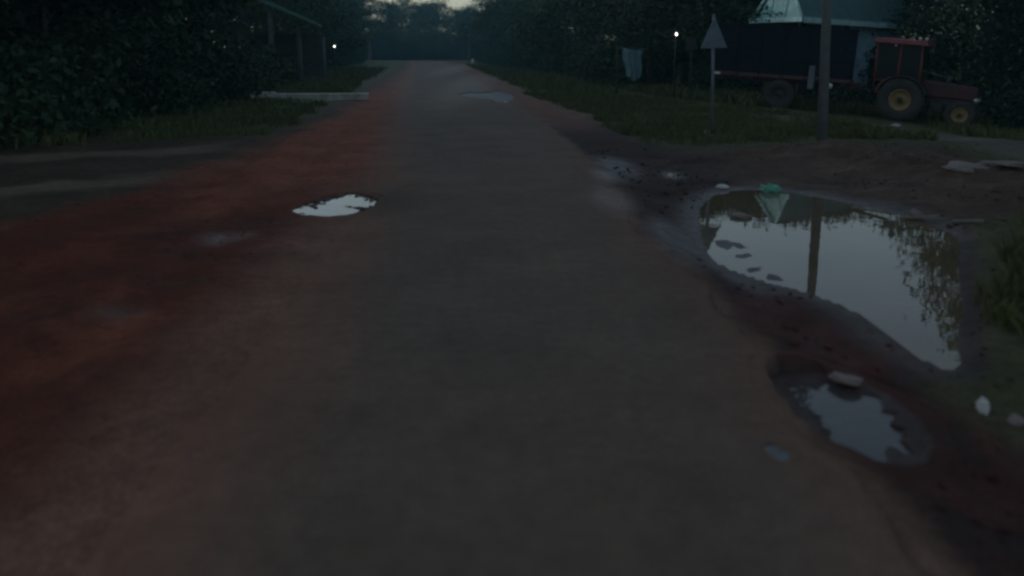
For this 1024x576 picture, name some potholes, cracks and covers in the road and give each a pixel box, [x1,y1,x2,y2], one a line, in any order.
pothole [456,91,518,103]
pothole [751,349,958,477]
pothole [285,190,385,218]
